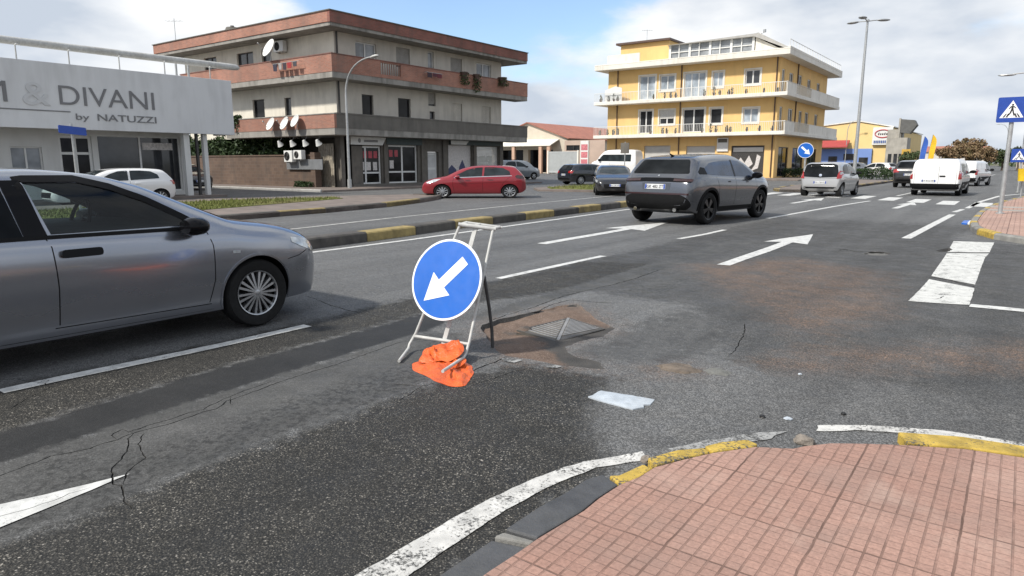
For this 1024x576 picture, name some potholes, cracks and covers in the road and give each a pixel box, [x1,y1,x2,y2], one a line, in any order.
crack [0,339,419,509]
